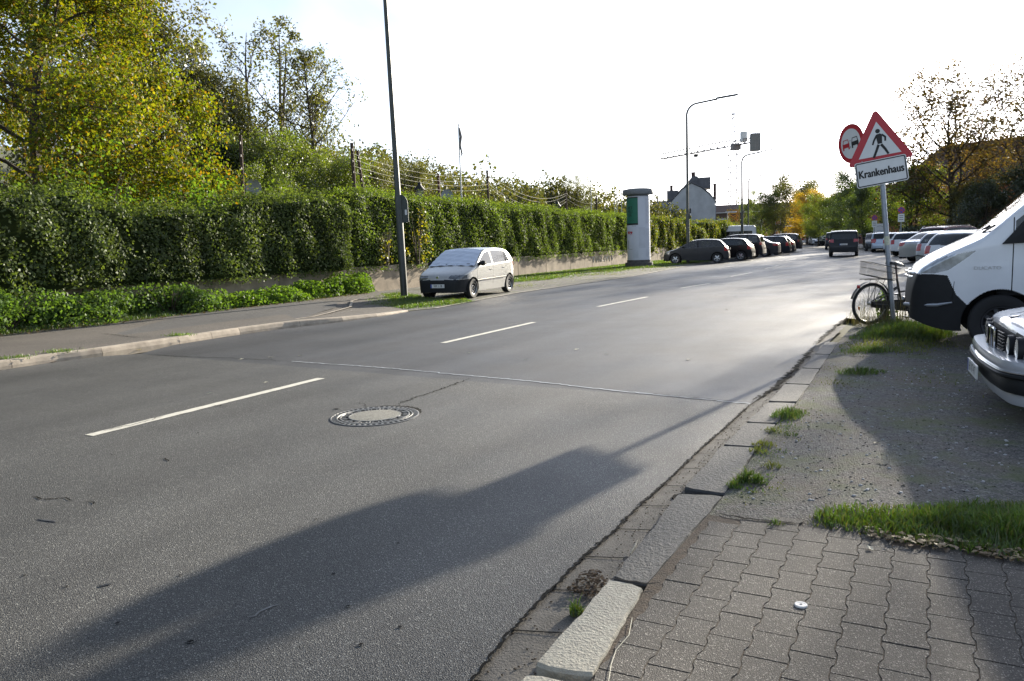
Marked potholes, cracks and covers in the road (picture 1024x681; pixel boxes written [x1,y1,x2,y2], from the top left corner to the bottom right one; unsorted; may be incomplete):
manhole cover [330,406,419,426]
